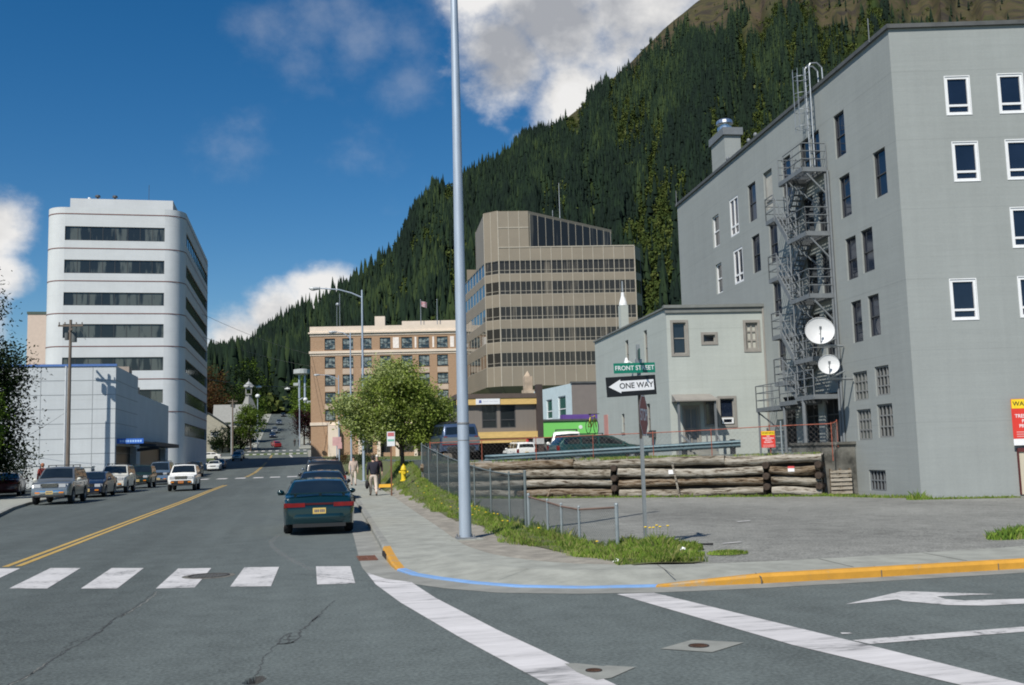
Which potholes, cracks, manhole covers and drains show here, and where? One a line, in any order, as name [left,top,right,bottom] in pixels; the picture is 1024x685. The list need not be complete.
drain grate [356,551,386,561]
manhole cover [661,640,744,652]
crack [7,591,158,685]
crack [254,601,334,676]
manhole cover [565,663,634,680]
